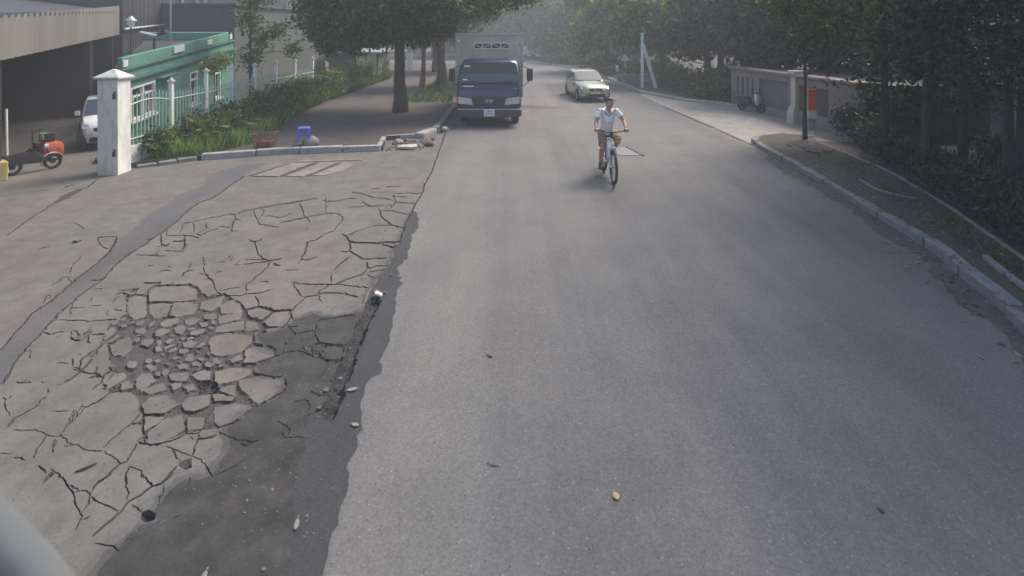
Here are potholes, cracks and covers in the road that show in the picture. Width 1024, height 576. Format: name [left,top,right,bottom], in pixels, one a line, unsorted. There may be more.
pothole [199,380,221,394]
pothole [140,510,157,523]
crack [0,176,422,551]
